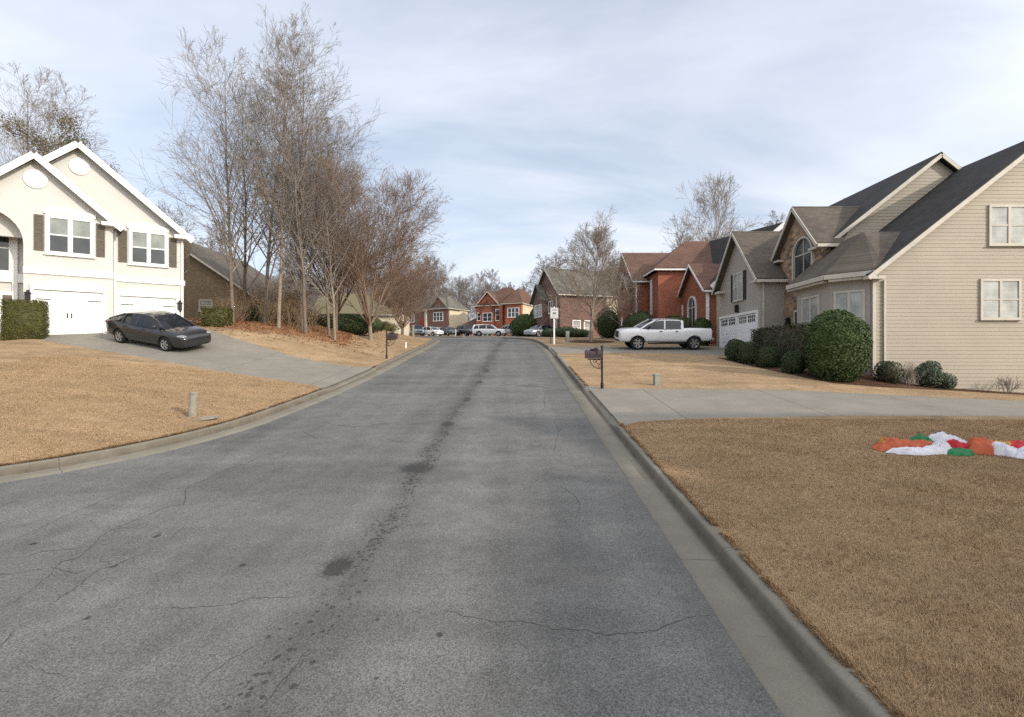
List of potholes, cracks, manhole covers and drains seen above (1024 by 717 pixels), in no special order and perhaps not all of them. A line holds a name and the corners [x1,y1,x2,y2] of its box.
crack [4,450,282,607]
crack [439,608,707,635]
